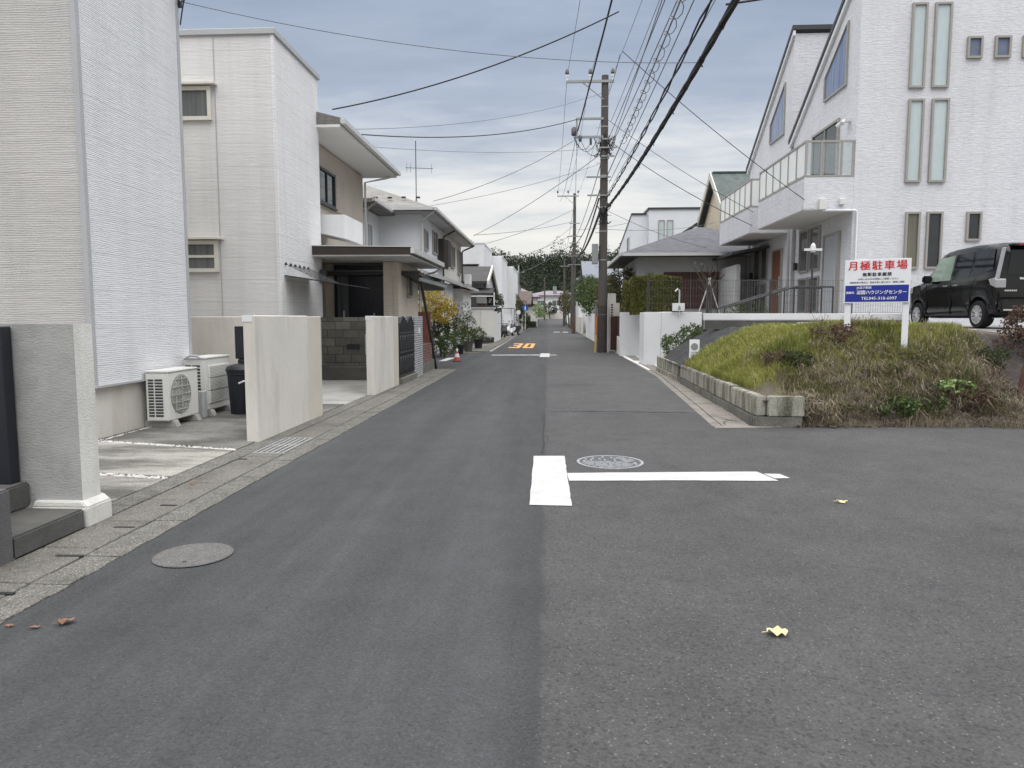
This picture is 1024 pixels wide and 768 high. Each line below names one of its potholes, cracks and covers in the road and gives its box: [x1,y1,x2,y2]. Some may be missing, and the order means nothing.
manhole cover [577,455,644,470]
manhole cover [152,543,234,567]
drain grate [252,437,314,454]
